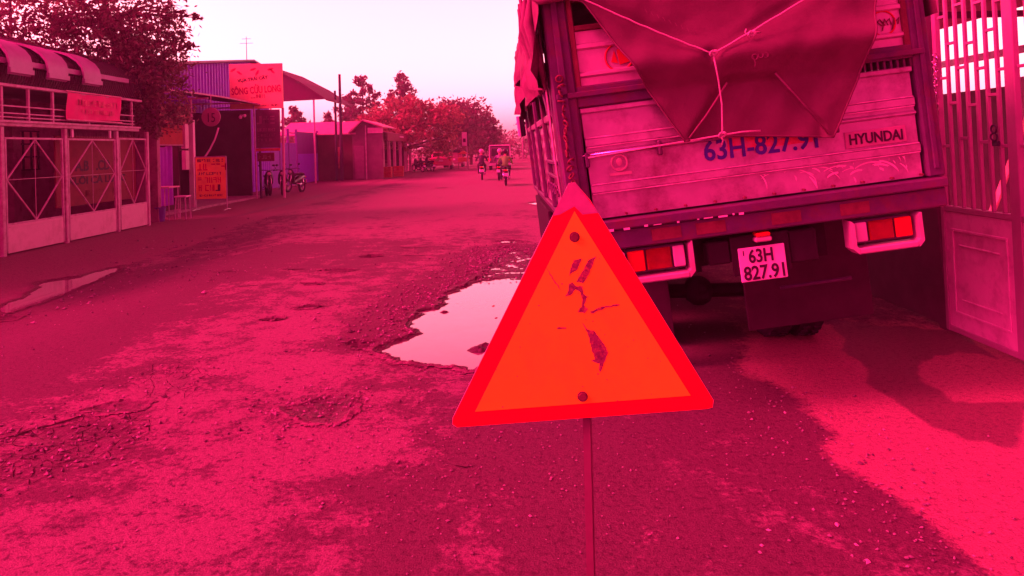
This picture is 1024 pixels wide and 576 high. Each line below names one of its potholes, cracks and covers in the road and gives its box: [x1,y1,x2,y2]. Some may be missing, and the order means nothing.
pothole [270,392,363,427]
crack [0,413,155,485]
pothole [363,248,534,374]
